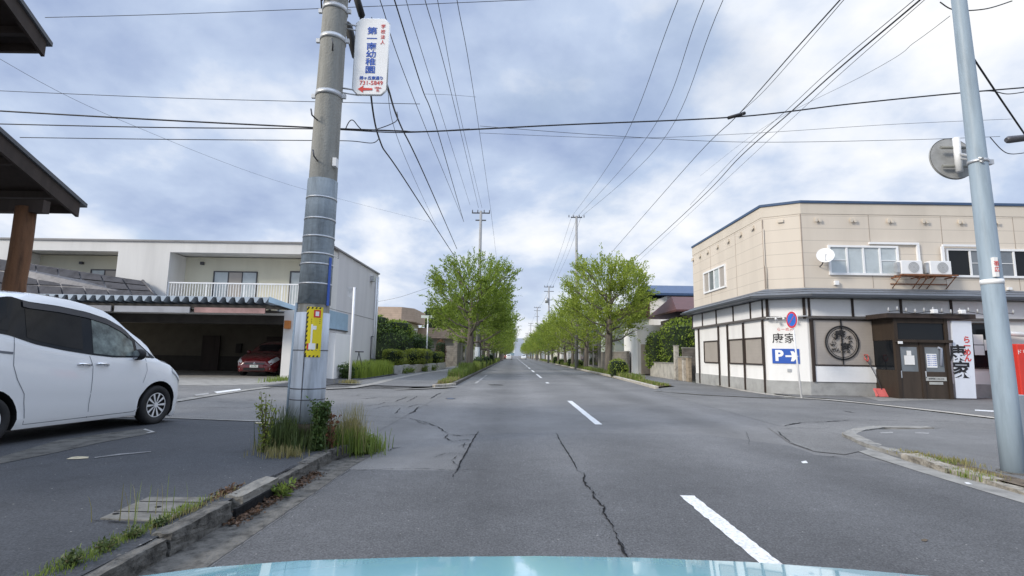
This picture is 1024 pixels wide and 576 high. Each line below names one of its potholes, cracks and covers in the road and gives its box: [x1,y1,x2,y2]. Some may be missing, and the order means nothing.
crack [361,393,478,477]
